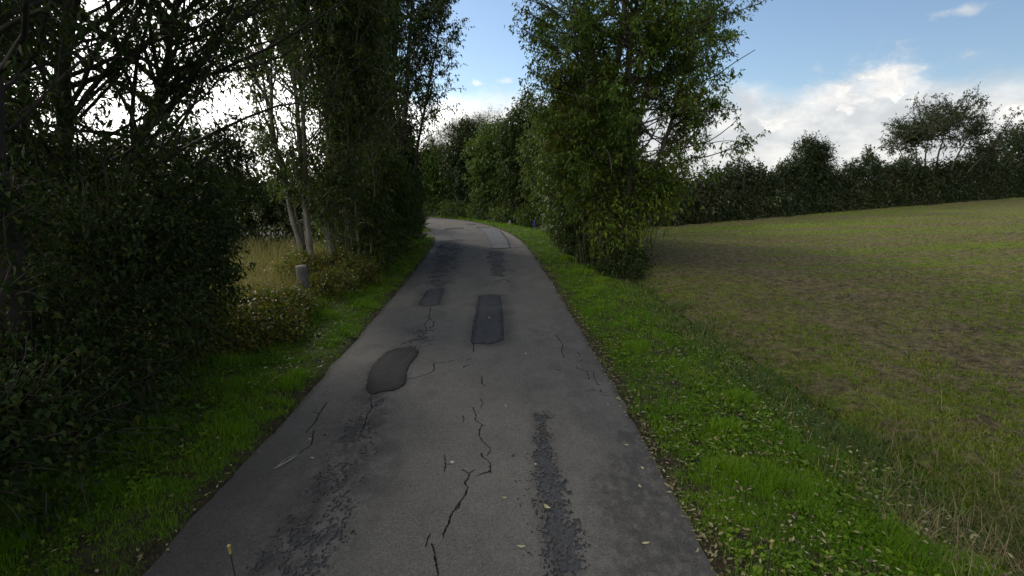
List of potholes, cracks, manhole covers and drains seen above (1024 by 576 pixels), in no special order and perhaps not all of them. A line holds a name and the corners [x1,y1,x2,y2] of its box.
crack [297,403,327,456]
crack [555,335,608,396]
crack [407,344,492,576]
